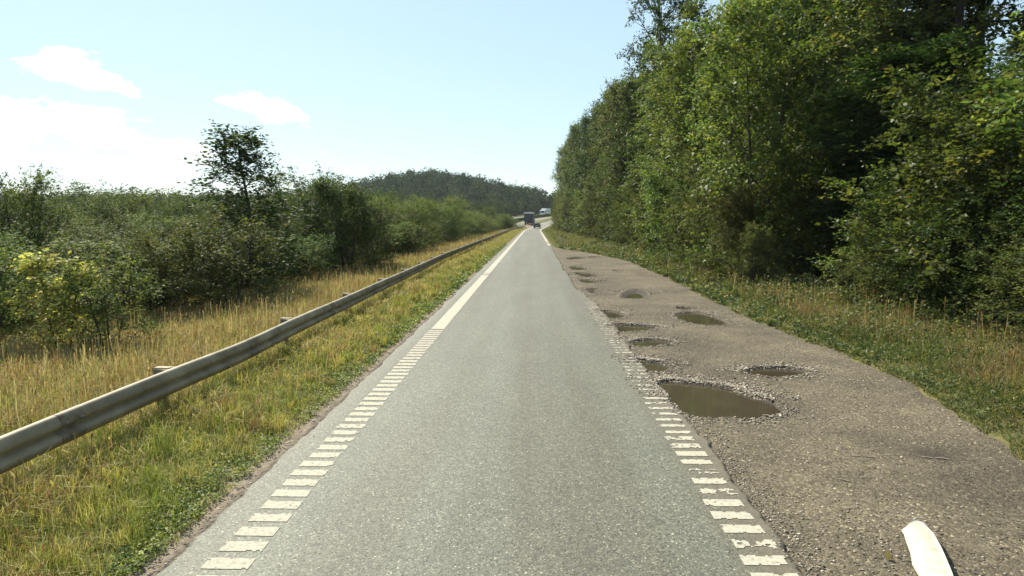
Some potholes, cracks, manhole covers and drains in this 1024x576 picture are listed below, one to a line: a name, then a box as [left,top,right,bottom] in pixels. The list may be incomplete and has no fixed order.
pothole [657,379,787,419]
pothole [615,323,660,332]
pothole [674,311,731,325]
pothole [745,366,813,377]
pothole [602,310,627,318]
pothole [629,338,673,346]
pothole [619,289,649,298]
pothole [639,358,671,372]
